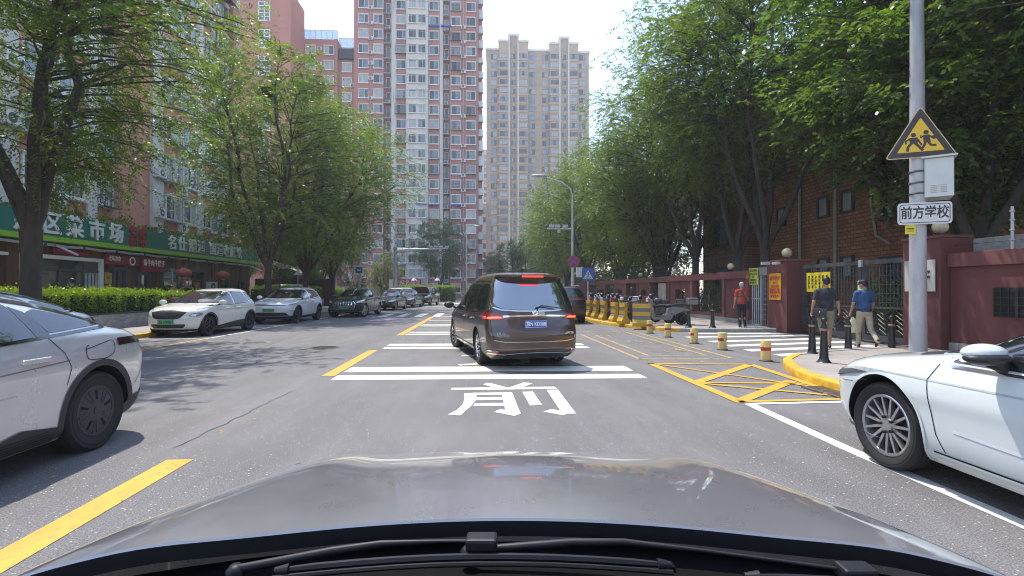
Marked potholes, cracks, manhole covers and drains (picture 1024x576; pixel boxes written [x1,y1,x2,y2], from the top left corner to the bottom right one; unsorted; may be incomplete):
crack [173,393,288,448]
